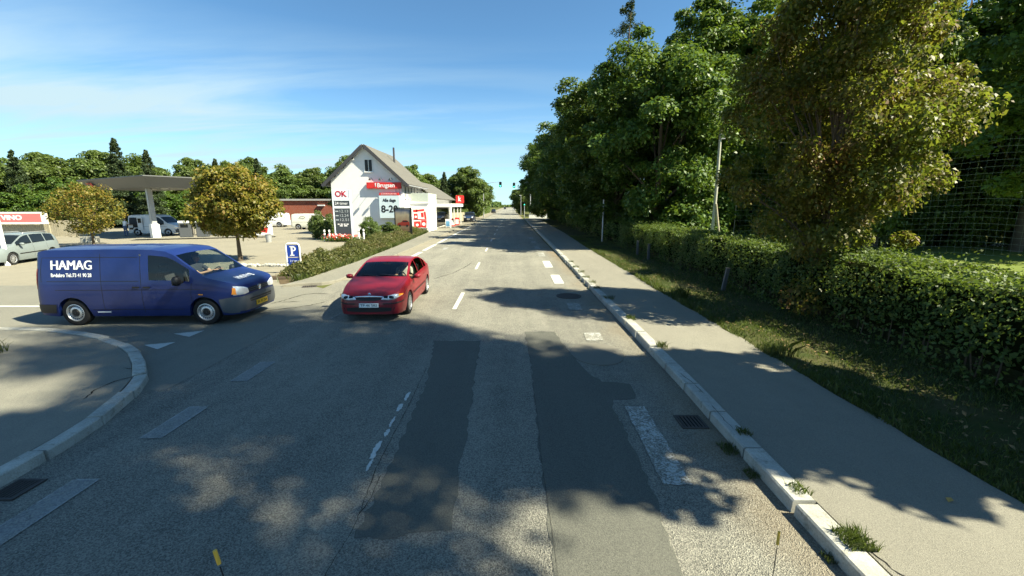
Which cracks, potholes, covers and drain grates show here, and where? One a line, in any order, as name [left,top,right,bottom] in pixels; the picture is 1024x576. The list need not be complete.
drain grate [673,415,709,429]
drain grate [0,479,48,501]
